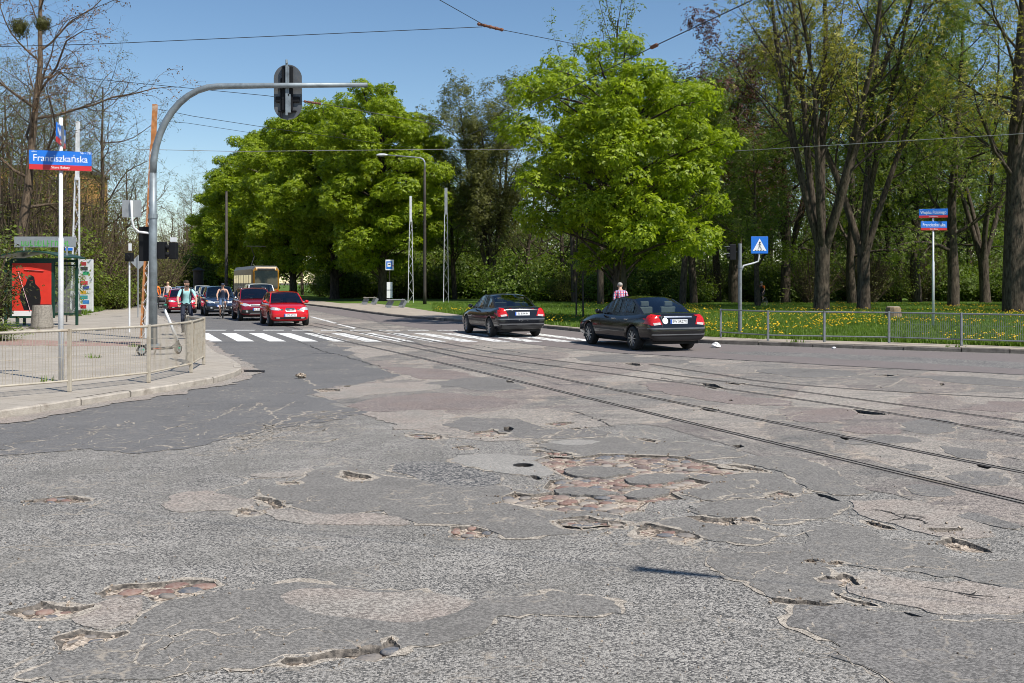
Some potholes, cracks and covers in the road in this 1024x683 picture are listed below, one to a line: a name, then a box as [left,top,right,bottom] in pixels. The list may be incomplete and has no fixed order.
pothole [936,535,993,553]
pothole [21,495,95,503]
pothole [552,515,635,531]
pothole [249,496,290,509]
pothole [501,453,750,515]
pothole [1,601,102,622]
pothole [813,572,865,587]
pothole [269,635,401,668]
pothole [448,524,494,540]
crack [687,479,937,579]
pothole [97,577,225,603]
